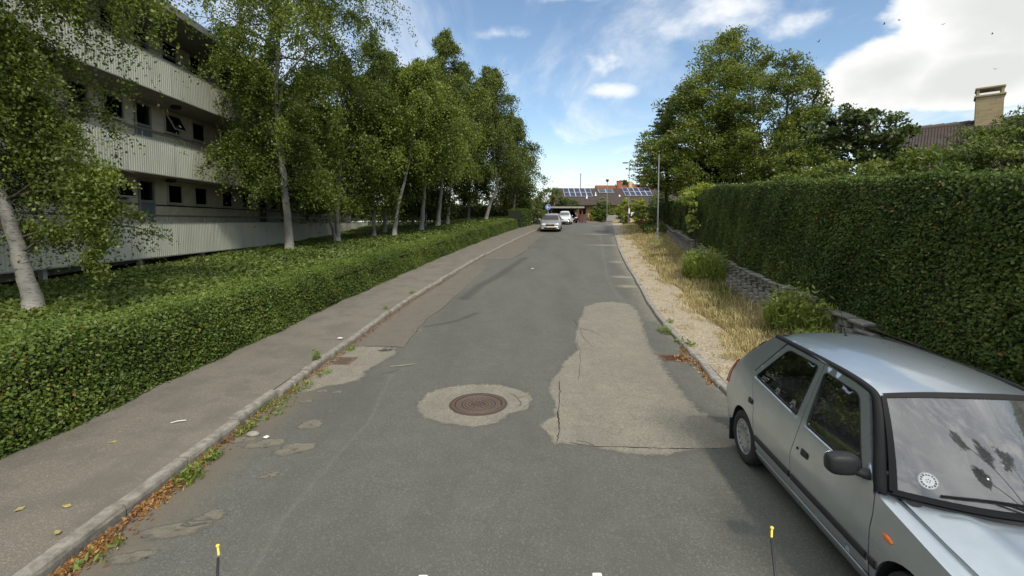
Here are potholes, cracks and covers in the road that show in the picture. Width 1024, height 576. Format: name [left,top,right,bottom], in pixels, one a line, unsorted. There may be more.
crack [557,381,691,449]
manhole cover [449,393,507,416]
drain grate [330,357,358,365]
